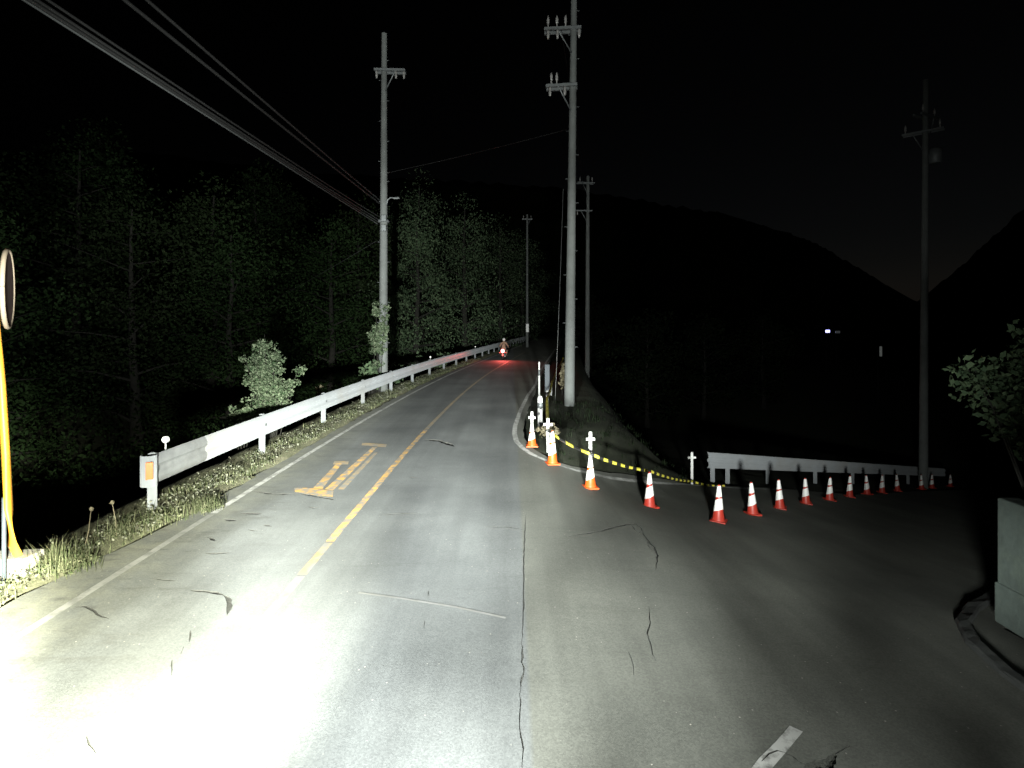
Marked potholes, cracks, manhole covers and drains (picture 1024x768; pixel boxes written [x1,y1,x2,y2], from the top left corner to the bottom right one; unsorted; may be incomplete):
crack [569,523,659,570]
crack [153,578,233,614]
crack [628,611,655,675]
crack [76,606,109,619]
crack [205,513,270,554]
